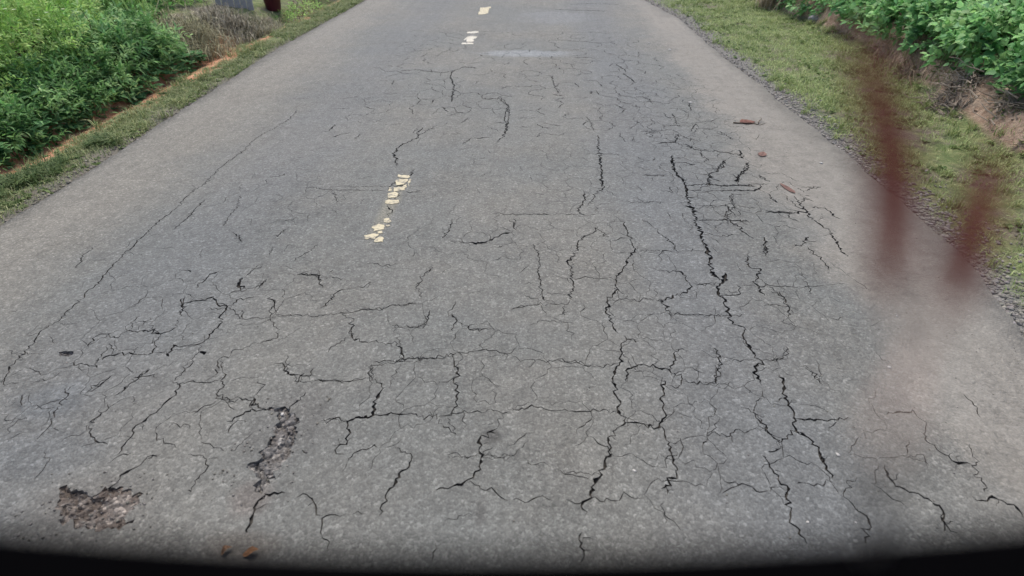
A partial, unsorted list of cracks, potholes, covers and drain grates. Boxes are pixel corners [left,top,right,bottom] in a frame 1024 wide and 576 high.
crack [587,118,623,192]
crack [325,30,714,143]
crack [334,143,722,492]
crack [671,163,848,478]
crack [905,409,972,465]
crack [298,493,321,516]
crack [320,511,365,549]
crack [107,385,181,464]
pothole [14,470,182,533]
crack [288,303,412,317]
crack [606,241,960,529]
crack [972,477,1023,516]
